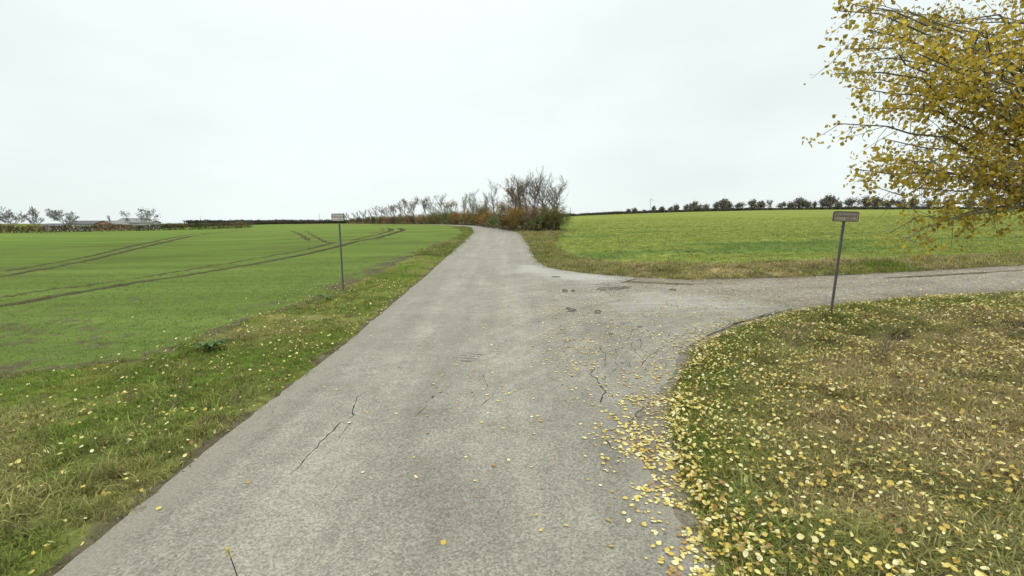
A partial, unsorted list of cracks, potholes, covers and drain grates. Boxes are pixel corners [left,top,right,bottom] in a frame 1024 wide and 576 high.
crack [590,310,779,404]
crack [289,394,362,476]
